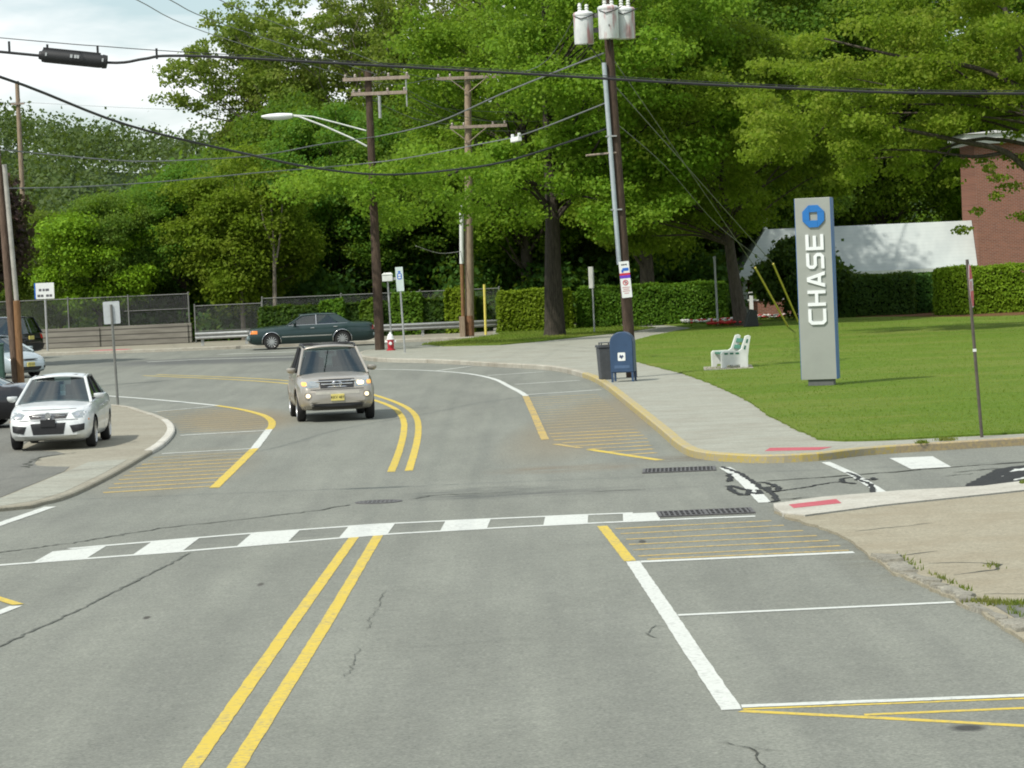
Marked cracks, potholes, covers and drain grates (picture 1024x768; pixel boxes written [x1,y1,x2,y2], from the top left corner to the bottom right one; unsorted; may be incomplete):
drain grate [656,507,756,517]
crack [726,742,785,768]
crack [0,552,191,646]
crack [343,593,527,675]
